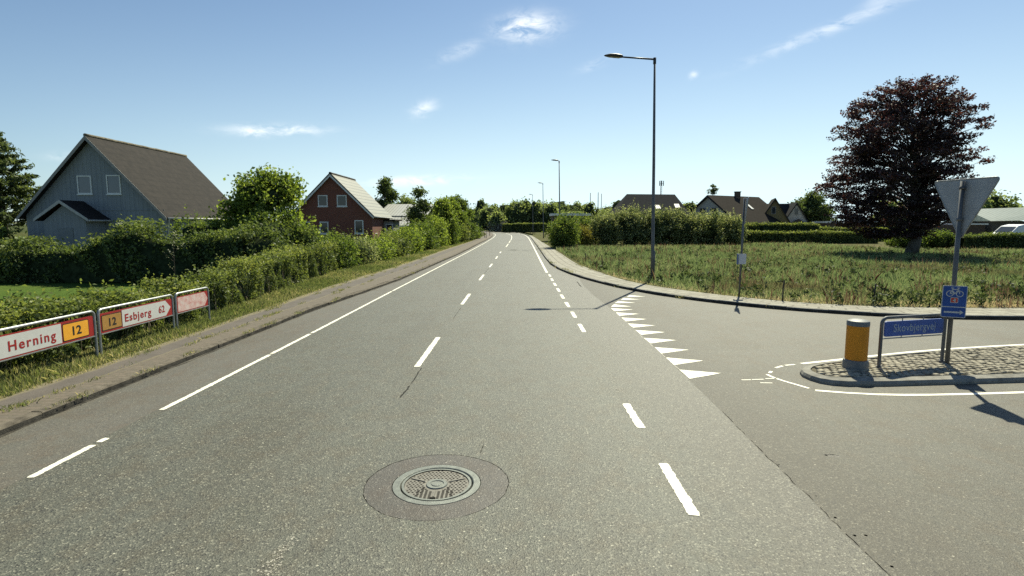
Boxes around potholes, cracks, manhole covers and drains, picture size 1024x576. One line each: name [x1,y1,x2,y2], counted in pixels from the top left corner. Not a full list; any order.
manhole cover [392,465,481,505]
